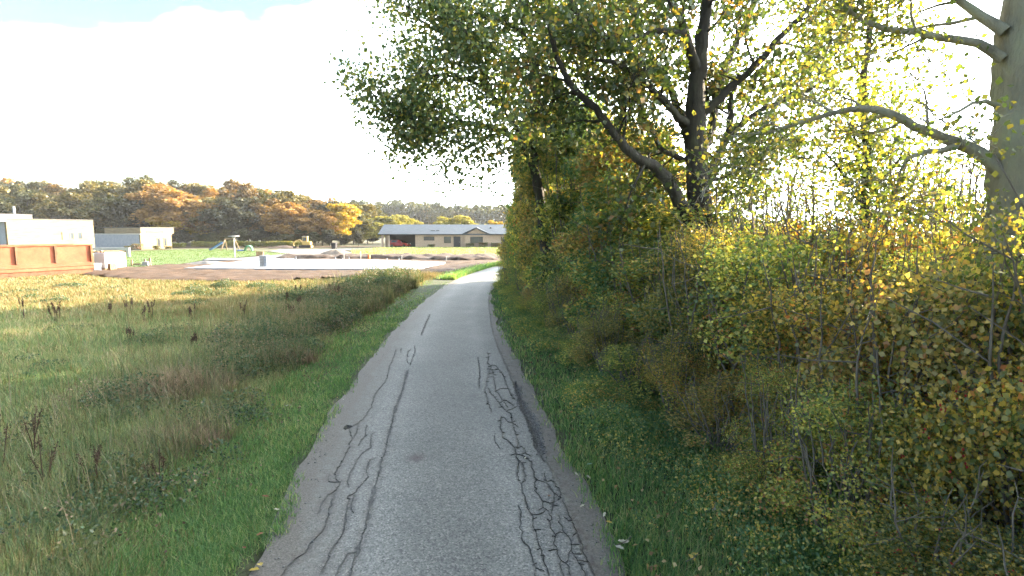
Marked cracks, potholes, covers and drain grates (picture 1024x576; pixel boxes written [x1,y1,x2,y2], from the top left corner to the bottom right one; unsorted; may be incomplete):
crack [478,353,596,576]
crack [281,314,430,576]
